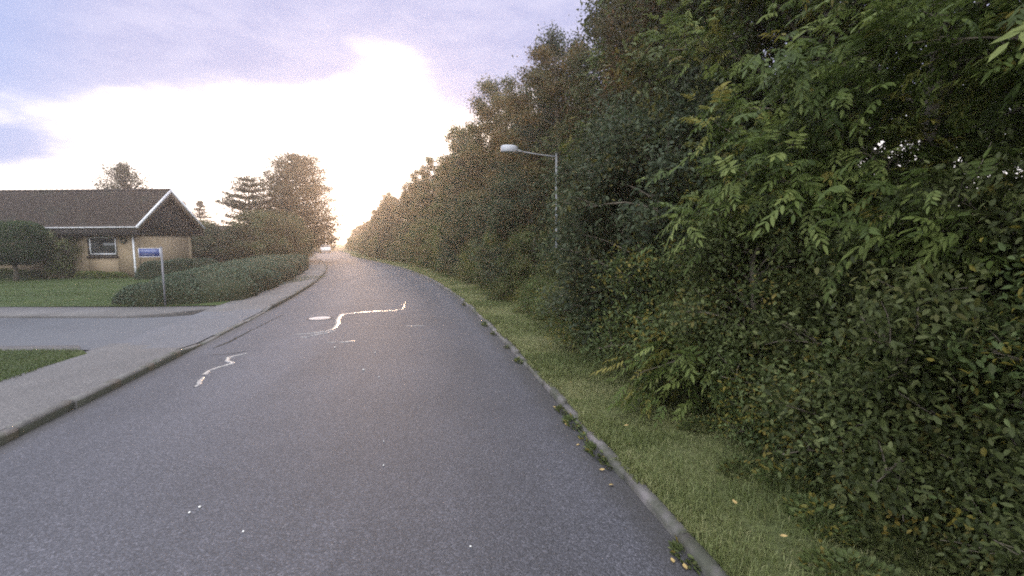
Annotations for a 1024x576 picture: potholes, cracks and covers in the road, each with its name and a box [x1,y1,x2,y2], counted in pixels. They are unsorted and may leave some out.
crack [213,314,283,355]
